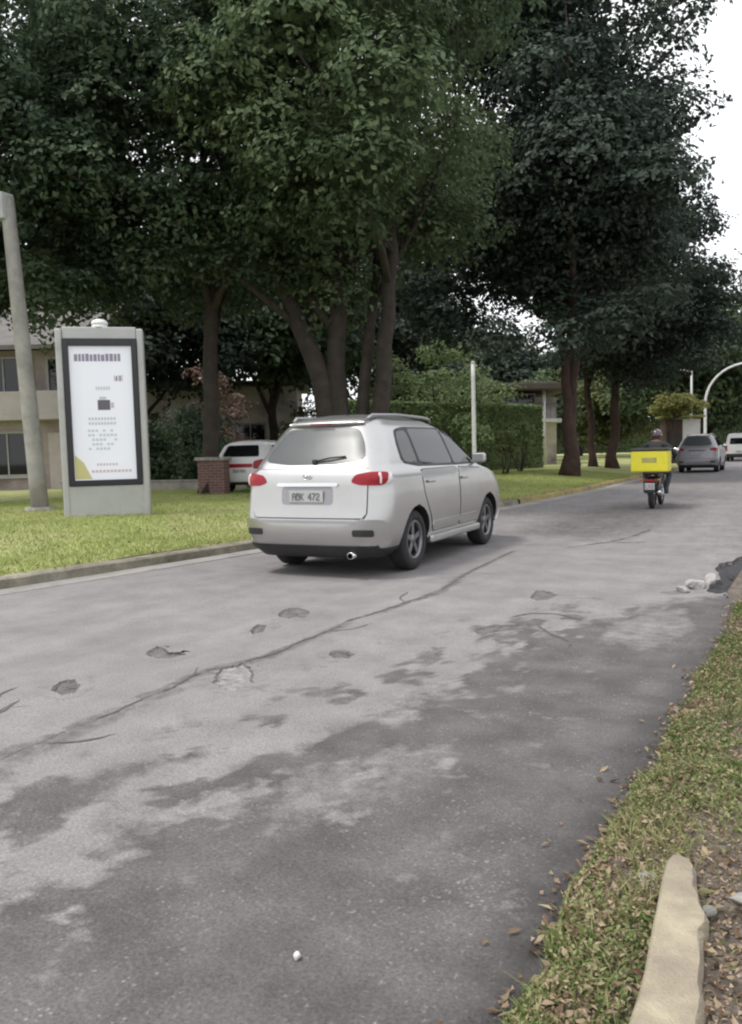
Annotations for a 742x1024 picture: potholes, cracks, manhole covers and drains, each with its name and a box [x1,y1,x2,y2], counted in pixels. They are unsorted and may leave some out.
crack [0,699,20,712]
pothole [240,622,275,637]
crack [574,529,651,547]
pothole [522,589,567,602]
pothole [703,556,742,601]
pothole [36,676,95,700]
pothole [269,606,320,621]
pothole [133,644,196,662]
crack [512,613,578,648]
pothole [317,648,368,661]
